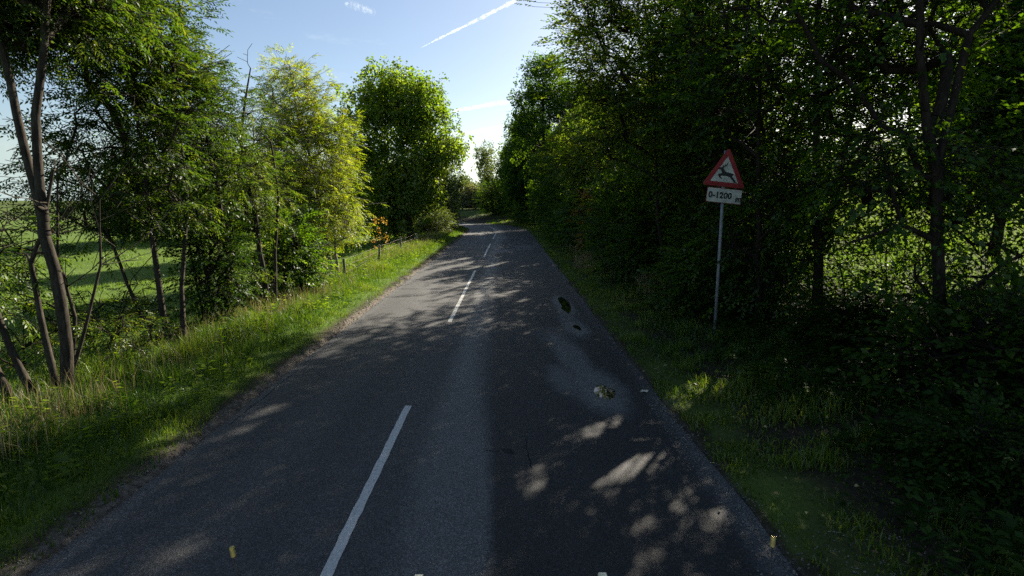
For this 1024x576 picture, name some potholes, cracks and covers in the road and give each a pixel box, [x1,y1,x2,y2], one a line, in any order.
pothole [558,297,571,314]
pothole [594,385,616,400]
